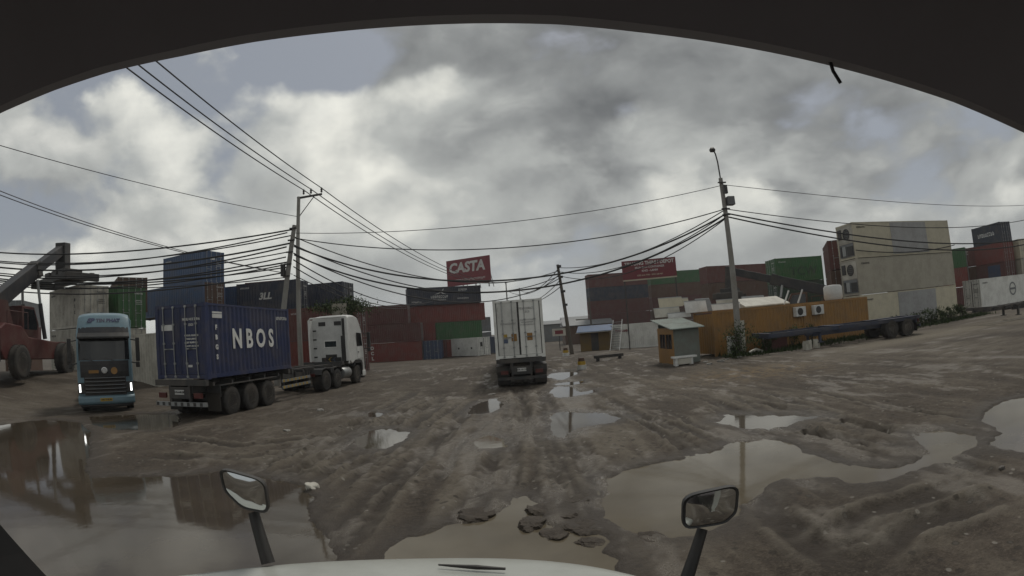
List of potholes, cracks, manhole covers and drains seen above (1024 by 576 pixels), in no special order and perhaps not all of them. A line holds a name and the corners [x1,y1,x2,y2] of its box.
pothole [80,412,187,431]
pothole [348,427,416,451]
pothole [589,427,988,544]
pothole [364,492,638,576]
pothole [462,398,507,416]
pothole [705,411,824,431]
pothole [542,410,628,440]
pothole [0,417,351,576]
pothole [970,395,1024,455]
pothole [465,433,511,450]
pothole [547,386,602,398]
